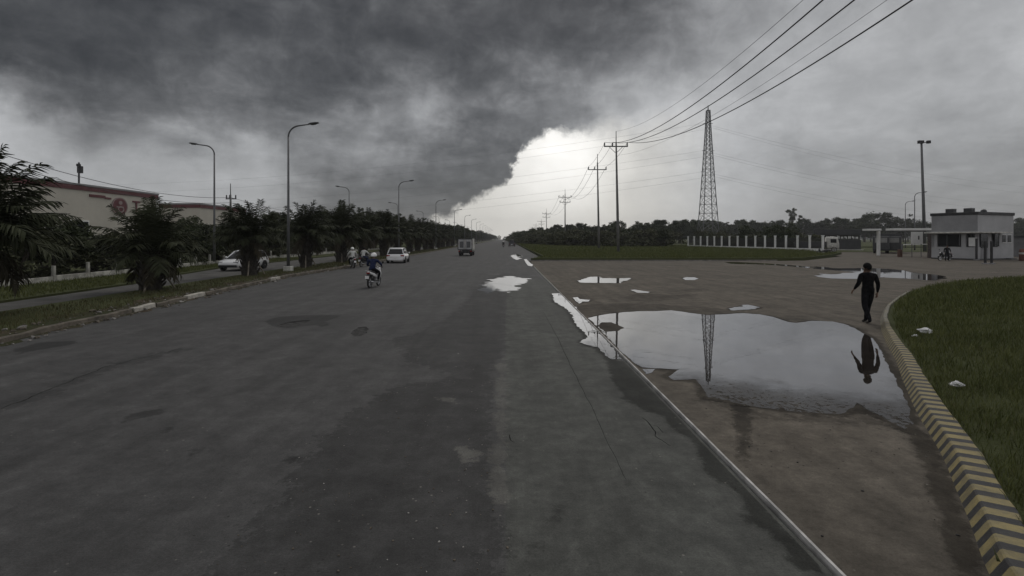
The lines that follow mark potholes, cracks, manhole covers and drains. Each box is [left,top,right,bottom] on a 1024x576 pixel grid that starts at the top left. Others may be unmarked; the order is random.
crack [543,312,626,479]
crack [1,350,173,409]
